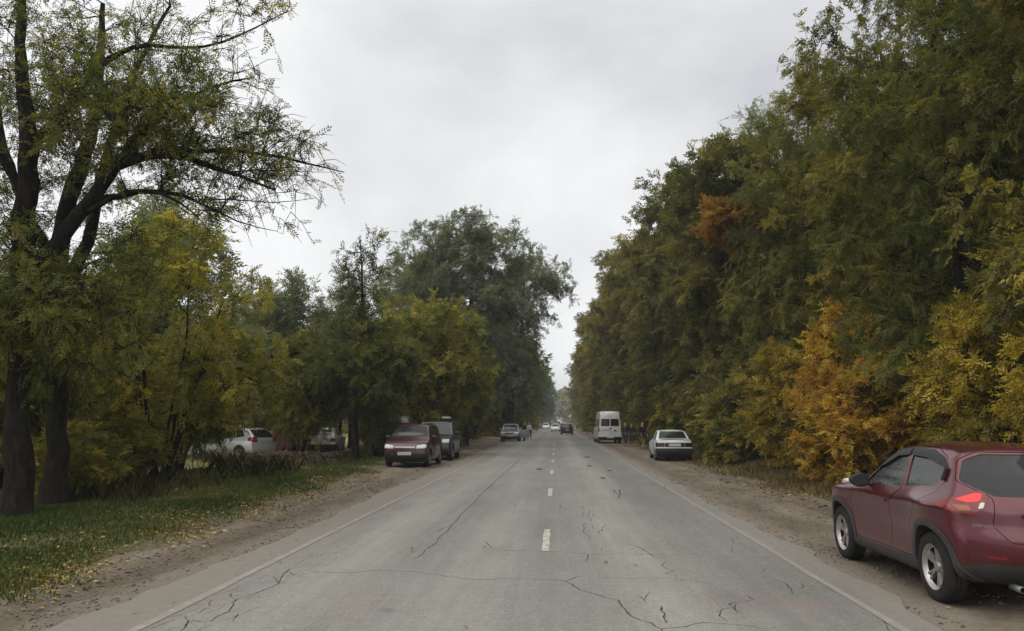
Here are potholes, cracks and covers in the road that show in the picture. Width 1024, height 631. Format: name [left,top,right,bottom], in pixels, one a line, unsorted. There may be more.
crack [150,461,849,631]
